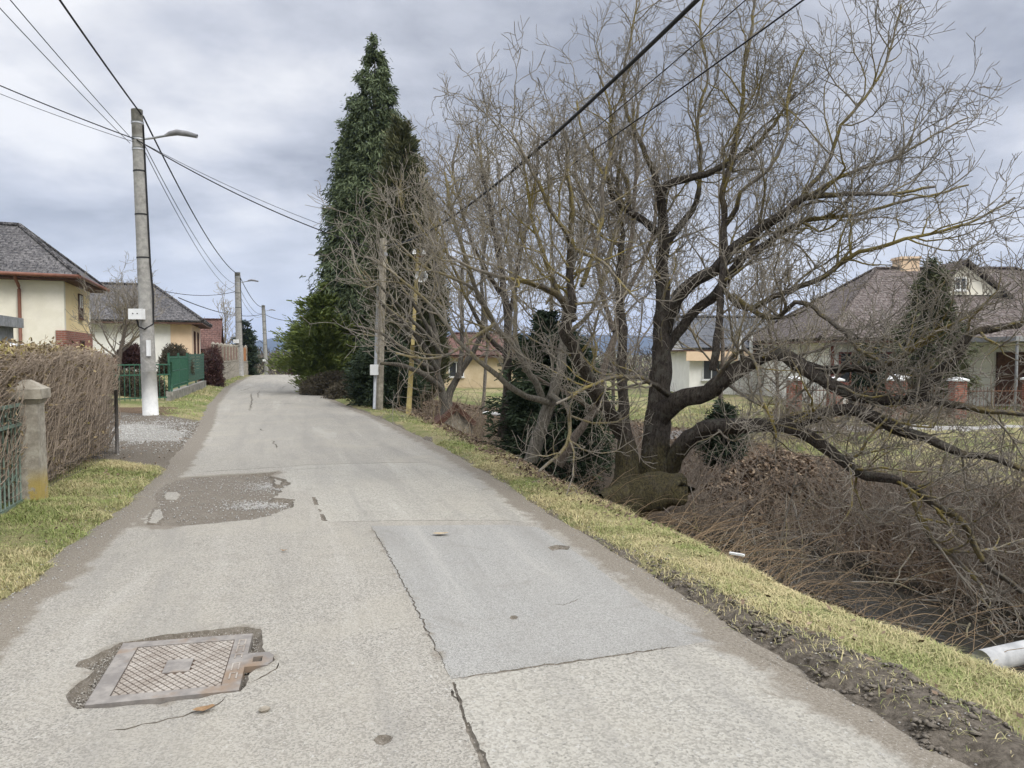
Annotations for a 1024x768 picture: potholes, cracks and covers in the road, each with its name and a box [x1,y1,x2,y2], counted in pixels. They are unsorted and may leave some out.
manhole cover [84,633,274,708]
crack [109,696,226,731]
